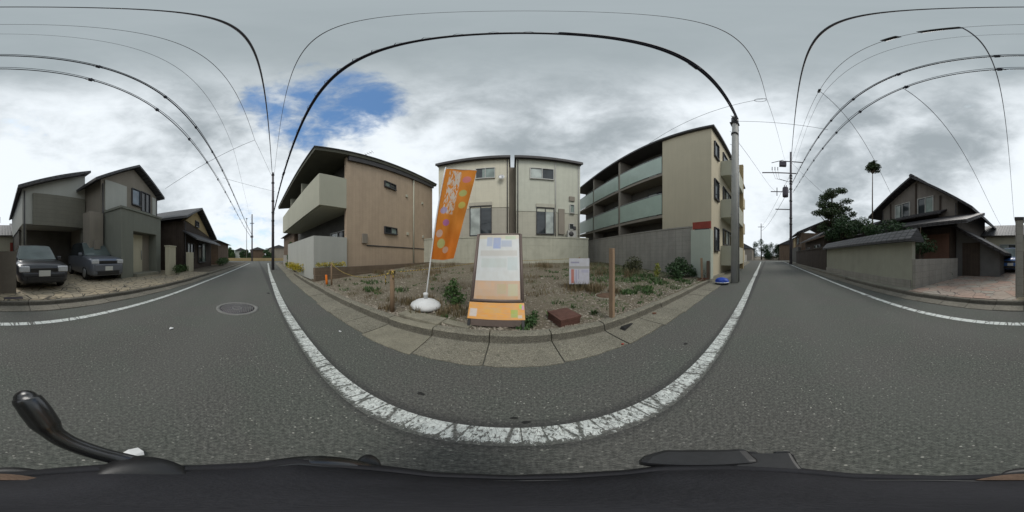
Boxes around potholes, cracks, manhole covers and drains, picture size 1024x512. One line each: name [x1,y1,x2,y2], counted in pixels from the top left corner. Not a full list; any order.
manhole cover [216,302,259,315]
